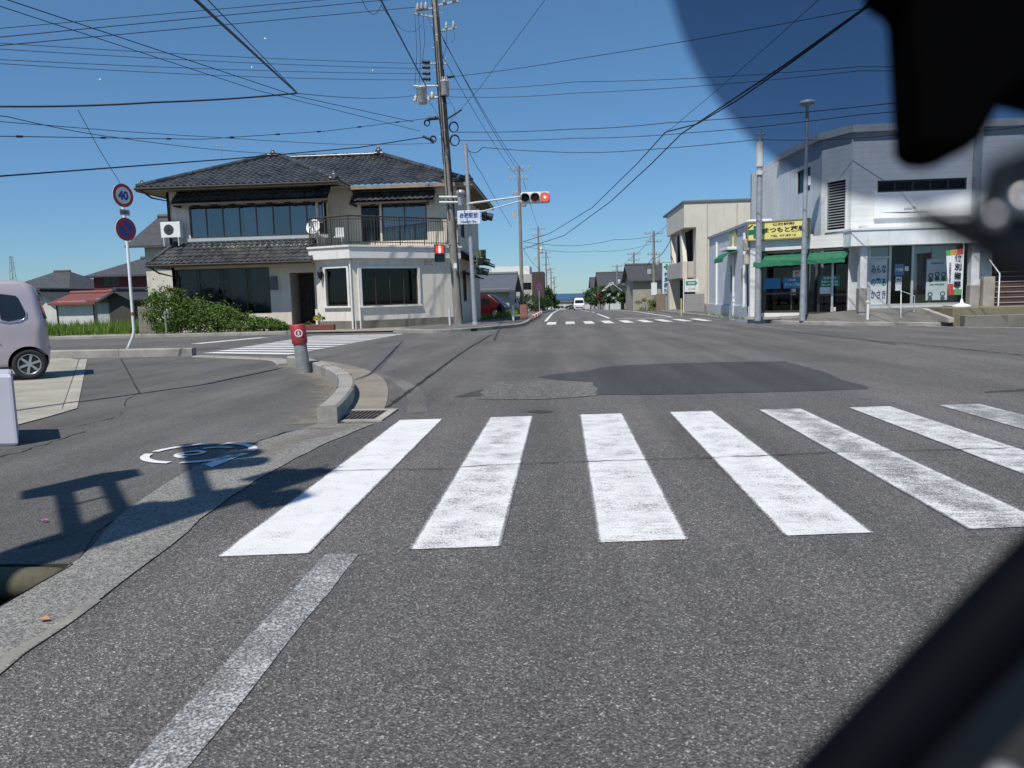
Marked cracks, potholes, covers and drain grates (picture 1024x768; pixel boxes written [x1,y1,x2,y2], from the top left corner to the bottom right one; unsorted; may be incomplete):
drain grate [338,408,398,422]
crack [0,413,123,457]
